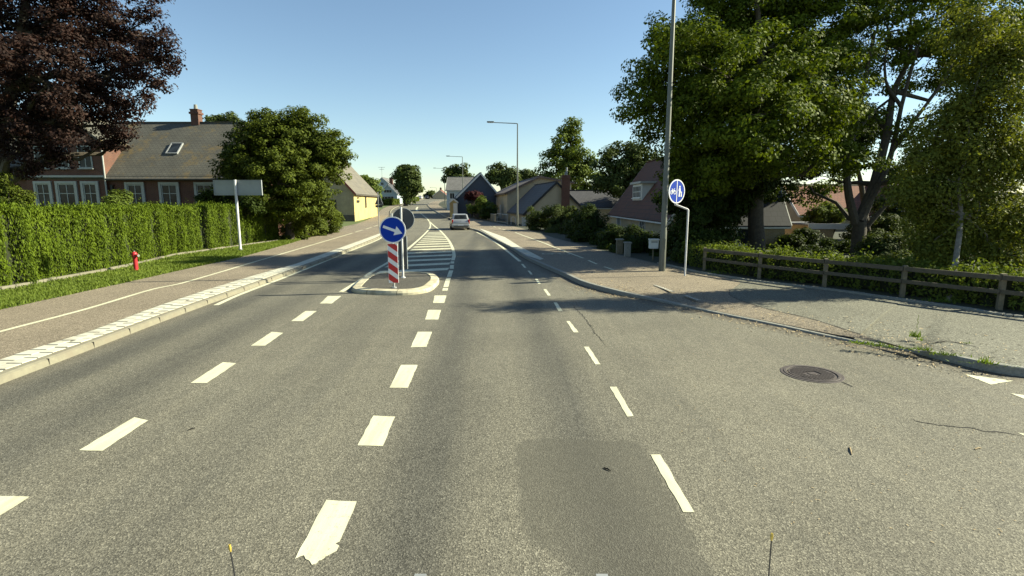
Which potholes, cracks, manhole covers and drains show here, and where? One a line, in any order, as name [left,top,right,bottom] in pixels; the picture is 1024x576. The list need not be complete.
crack [913,419,1020,436]
manhole cover [780,365,845,383]
